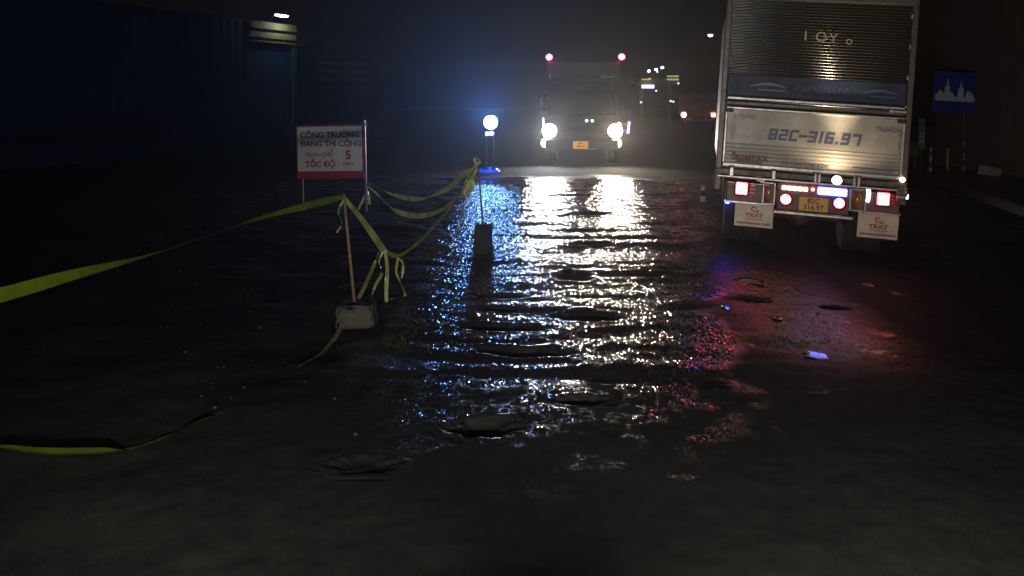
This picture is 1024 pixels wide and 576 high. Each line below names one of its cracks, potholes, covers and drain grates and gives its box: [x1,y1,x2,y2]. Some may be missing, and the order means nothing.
pothole [308,451,417,480]
pothole [547,267,602,285]
pothole [811,304,860,312]
pothole [460,343,594,361]
pothole [711,294,788,305]
pothole [420,412,545,443]
pothole [545,391,621,408]
pothole [531,306,638,324]
